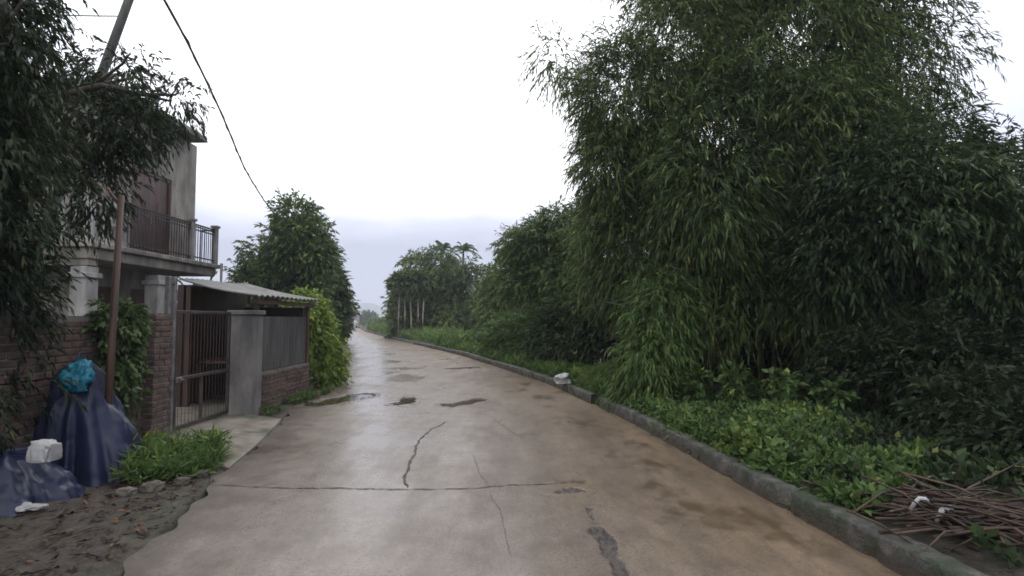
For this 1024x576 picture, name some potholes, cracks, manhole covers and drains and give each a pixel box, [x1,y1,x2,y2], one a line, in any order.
crack [225,421,571,556]
pothole [537,484,598,498]
pothole [298,392,380,408]
pothole [385,396,426,407]
pothole [436,397,490,408]
